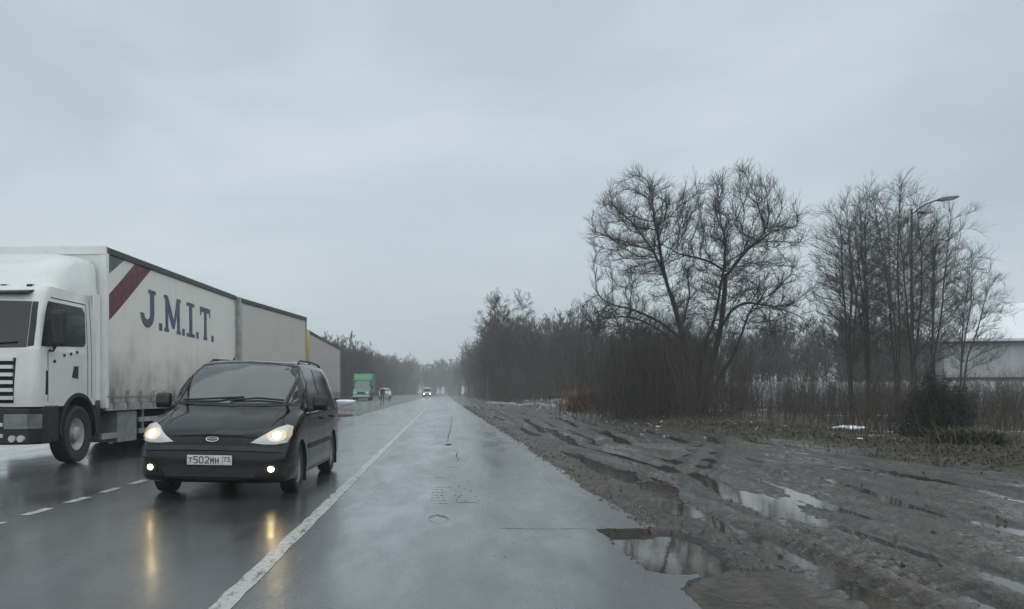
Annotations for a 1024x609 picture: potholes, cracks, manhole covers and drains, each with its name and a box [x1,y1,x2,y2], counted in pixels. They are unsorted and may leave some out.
crack [431,419,506,557]
pothole [596,528,740,579]
